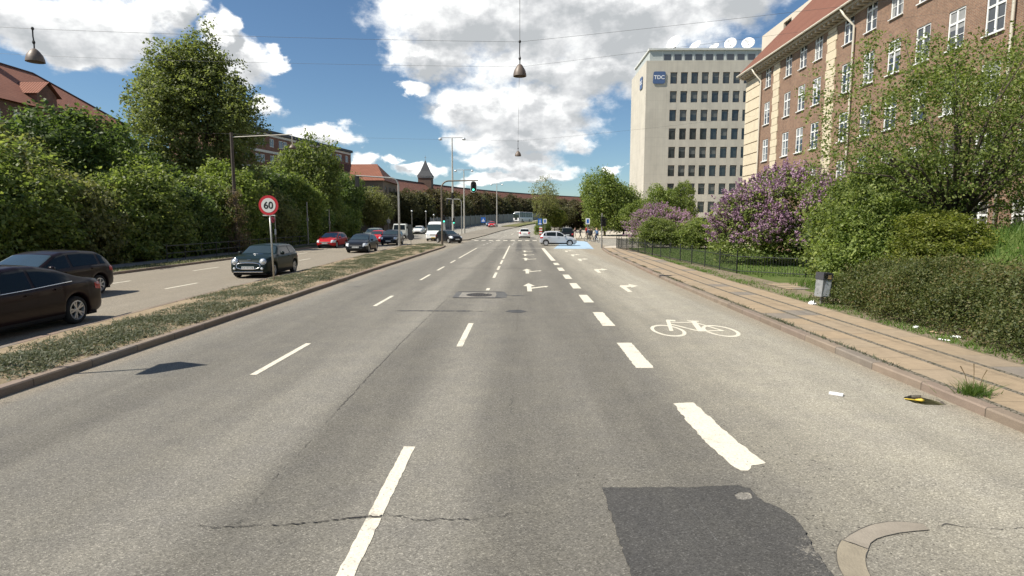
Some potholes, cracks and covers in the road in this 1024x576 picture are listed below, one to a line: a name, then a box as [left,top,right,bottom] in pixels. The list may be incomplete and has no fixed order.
crack [194,512,554,529]
